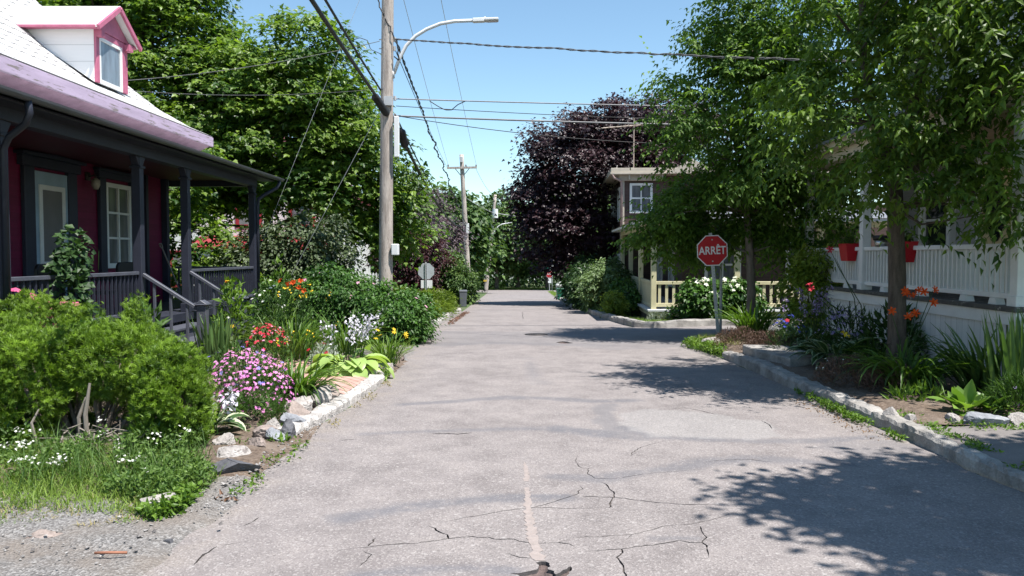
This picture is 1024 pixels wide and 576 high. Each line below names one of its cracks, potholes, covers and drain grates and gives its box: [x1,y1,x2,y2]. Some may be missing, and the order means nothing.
crack [344,458,769,576]
